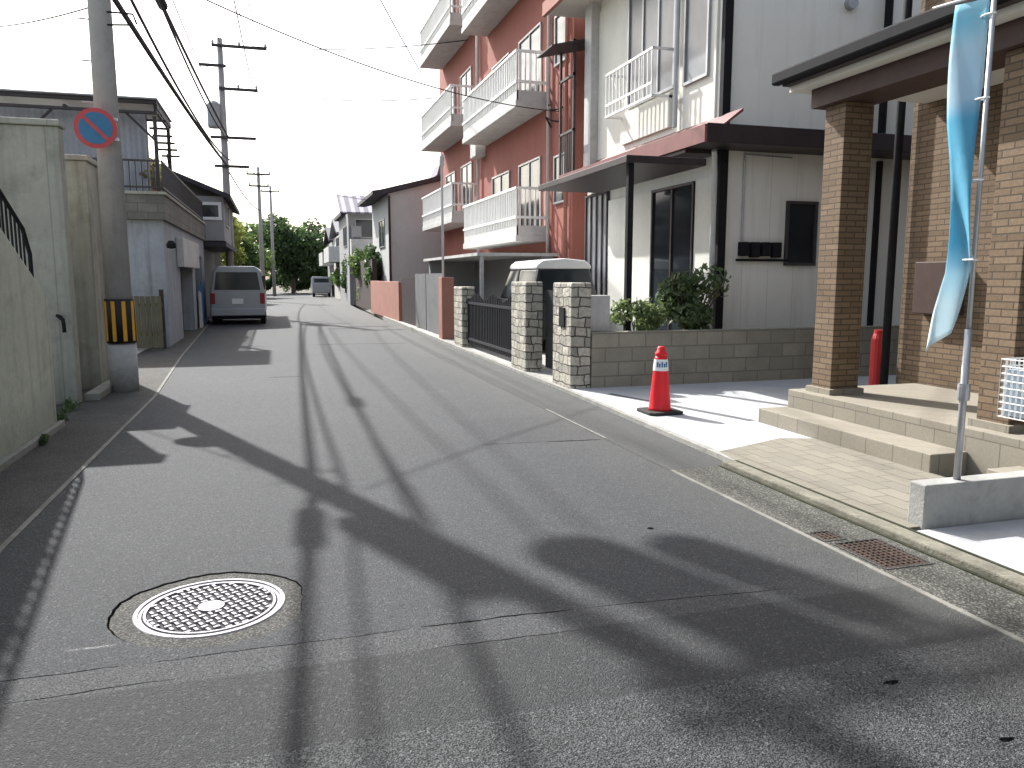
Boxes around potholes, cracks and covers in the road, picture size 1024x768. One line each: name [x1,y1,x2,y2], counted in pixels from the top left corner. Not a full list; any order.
drain grate [830,538,935,570]
manhole cover [109,573,303,649]
drain grate [806,530,847,542]
crack [0,571,785,682]
